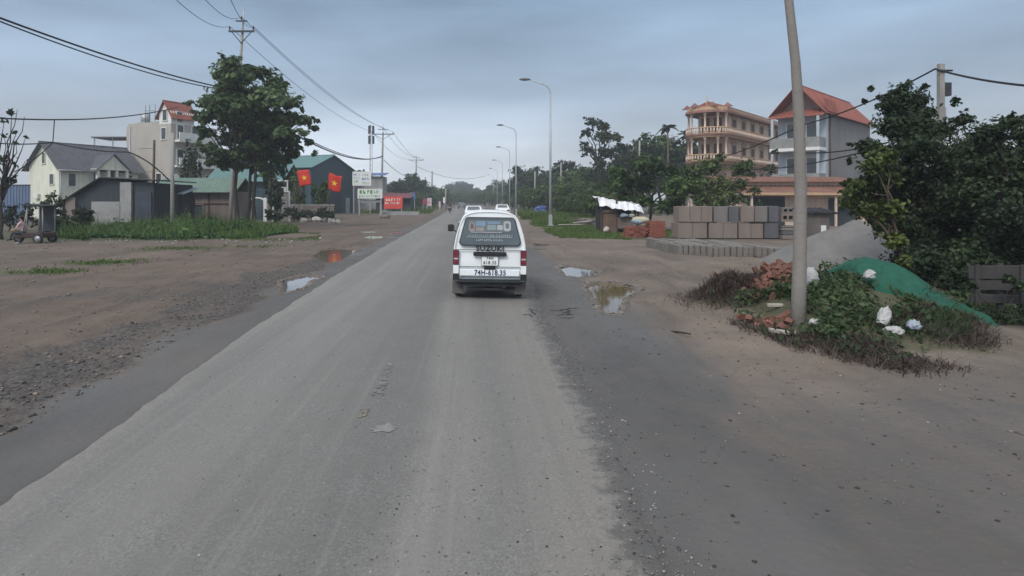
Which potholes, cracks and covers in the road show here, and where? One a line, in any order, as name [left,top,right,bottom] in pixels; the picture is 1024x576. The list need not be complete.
crack [524,308,575,319]
pothole [579,280,647,316]
pothole [553,265,604,278]
pothole [275,273,327,294]
